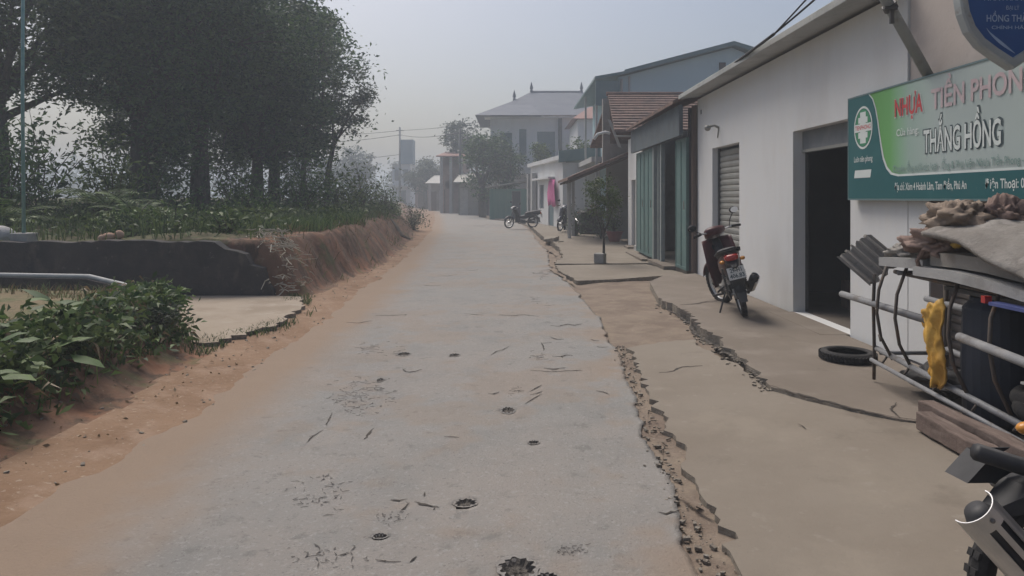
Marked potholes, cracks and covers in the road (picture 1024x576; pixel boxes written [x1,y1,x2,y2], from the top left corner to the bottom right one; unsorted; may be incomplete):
crack [655,301,916,429]
crack [307,341,422,442]
pothole [453,498,478,508]
crack [557,543,591,556]
crack [489,324,596,402]
pothole [496,555,539,576]
crack [376,492,438,525]
crack [289,544,416,568]
crack [285,474,351,516]
